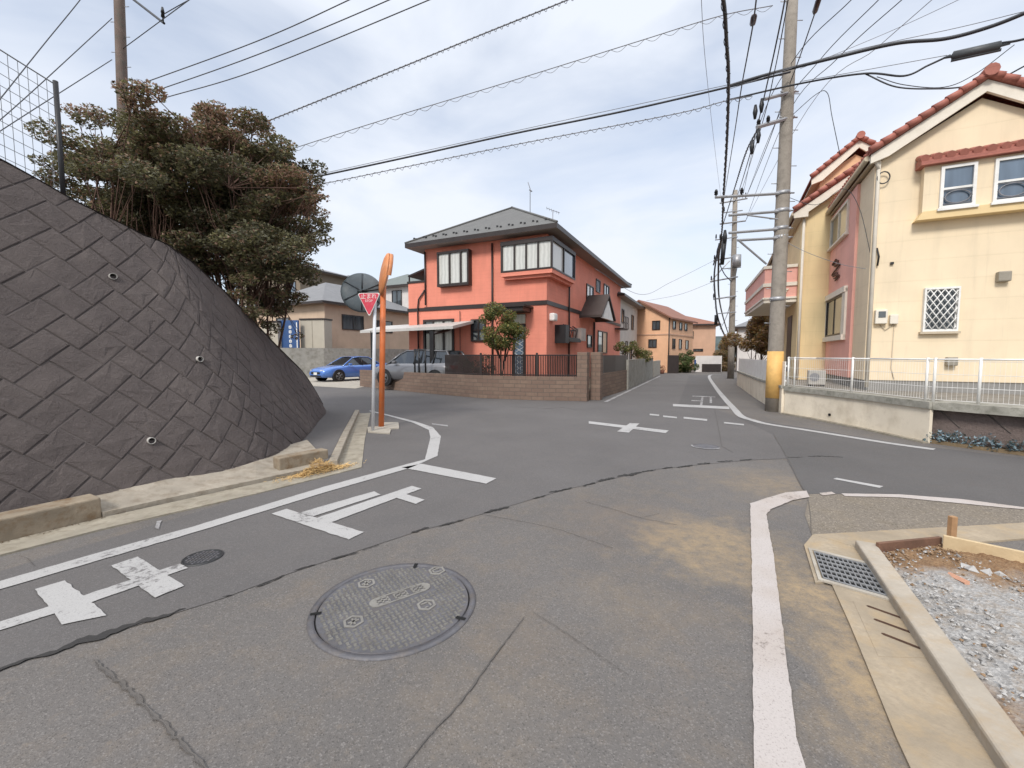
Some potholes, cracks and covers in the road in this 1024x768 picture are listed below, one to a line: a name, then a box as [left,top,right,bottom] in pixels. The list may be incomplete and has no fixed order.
crack [534,612,627,674]
drain grate [808,547,889,601]
crack [93,659,206,768]
manhole cover [181,549,224,567]
manhole cover [307,563,476,661]
